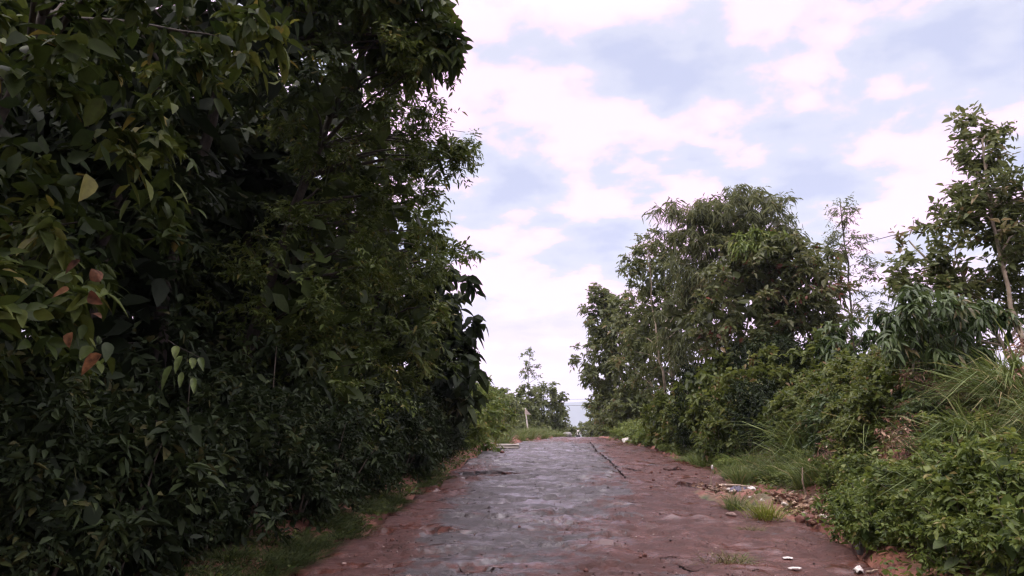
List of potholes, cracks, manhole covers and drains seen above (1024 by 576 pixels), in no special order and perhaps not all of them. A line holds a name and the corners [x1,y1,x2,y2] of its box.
crack [661,556,702,573]
crack [589,441,640,479]
